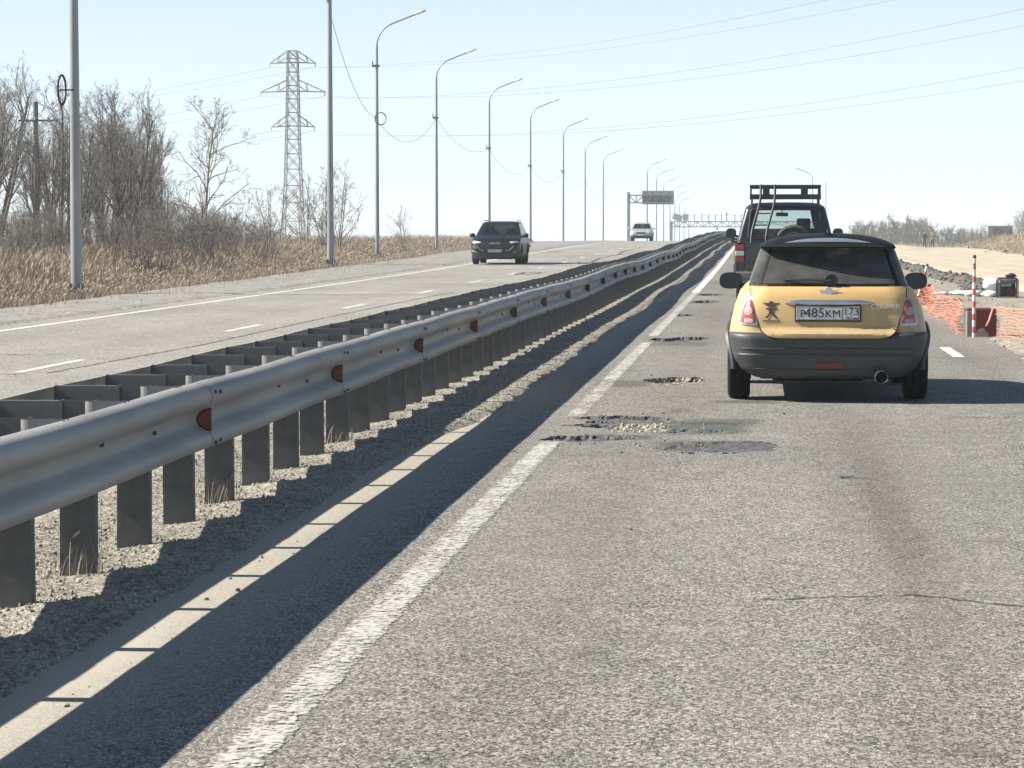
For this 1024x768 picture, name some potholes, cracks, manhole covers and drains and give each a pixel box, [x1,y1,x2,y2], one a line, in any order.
crack [759,594,1022,606]
pothole [660,441,779,452]
pothole [539,415,727,443]
pothole [639,377,708,386]
